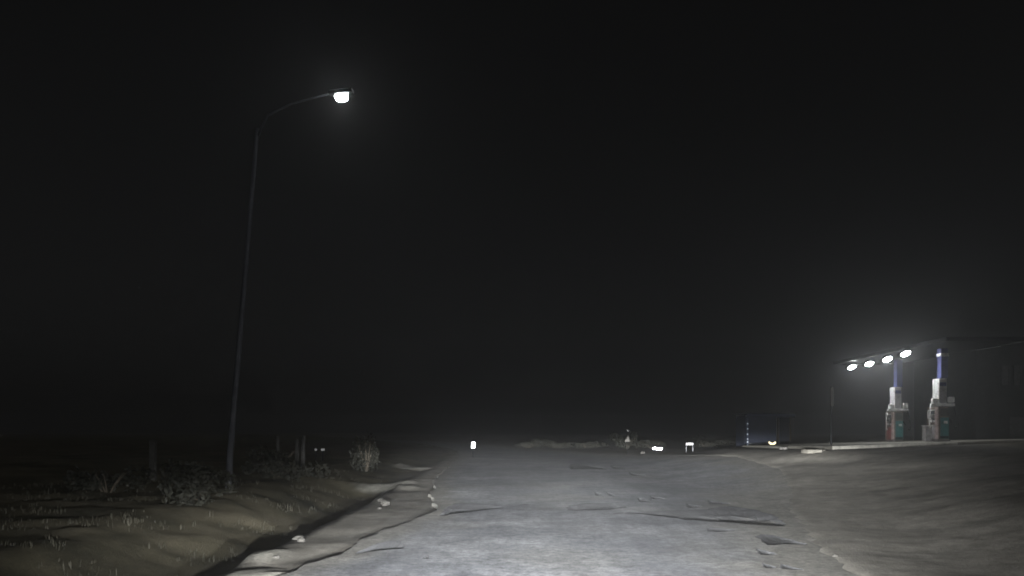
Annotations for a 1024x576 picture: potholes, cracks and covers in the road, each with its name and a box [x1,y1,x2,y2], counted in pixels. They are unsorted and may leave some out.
pothole [755,534,808,545]
crack [355,540,405,554]
